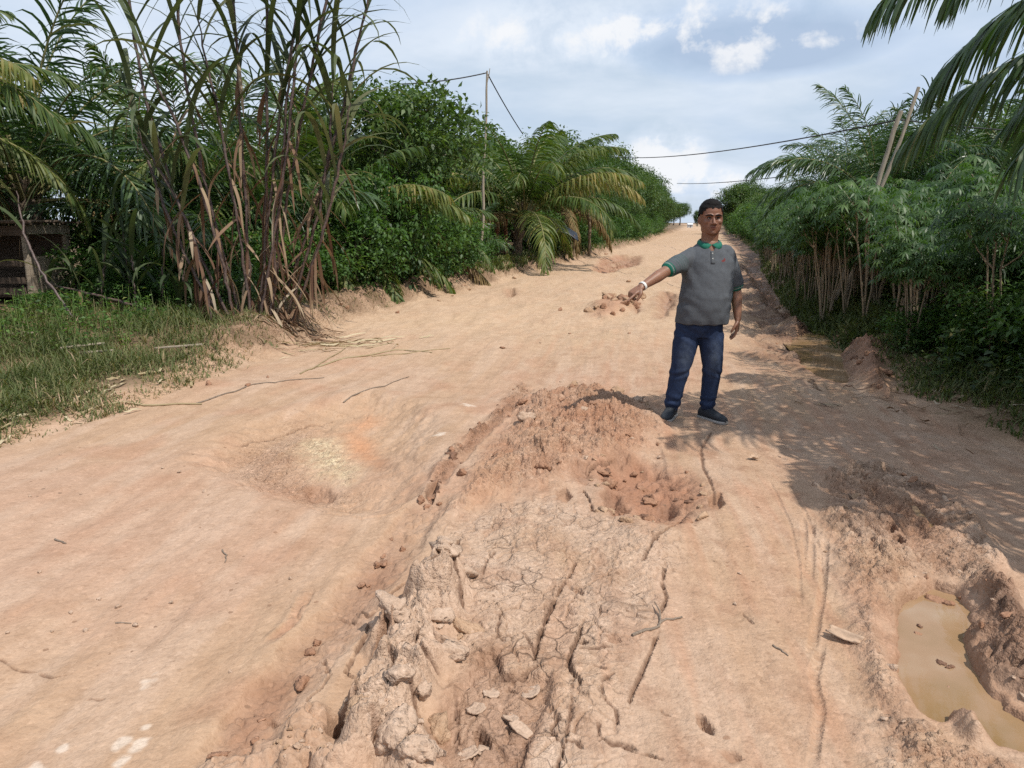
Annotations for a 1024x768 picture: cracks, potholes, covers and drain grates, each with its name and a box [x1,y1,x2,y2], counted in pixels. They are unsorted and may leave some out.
pothole [893,580,1024,748]
pothole [571,459,598,485]
pothole [591,455,707,527]
crack [488,522,680,768]
pothole [786,331,855,383]
pothole [611,445,631,473]
pothole [188,392,440,517]
